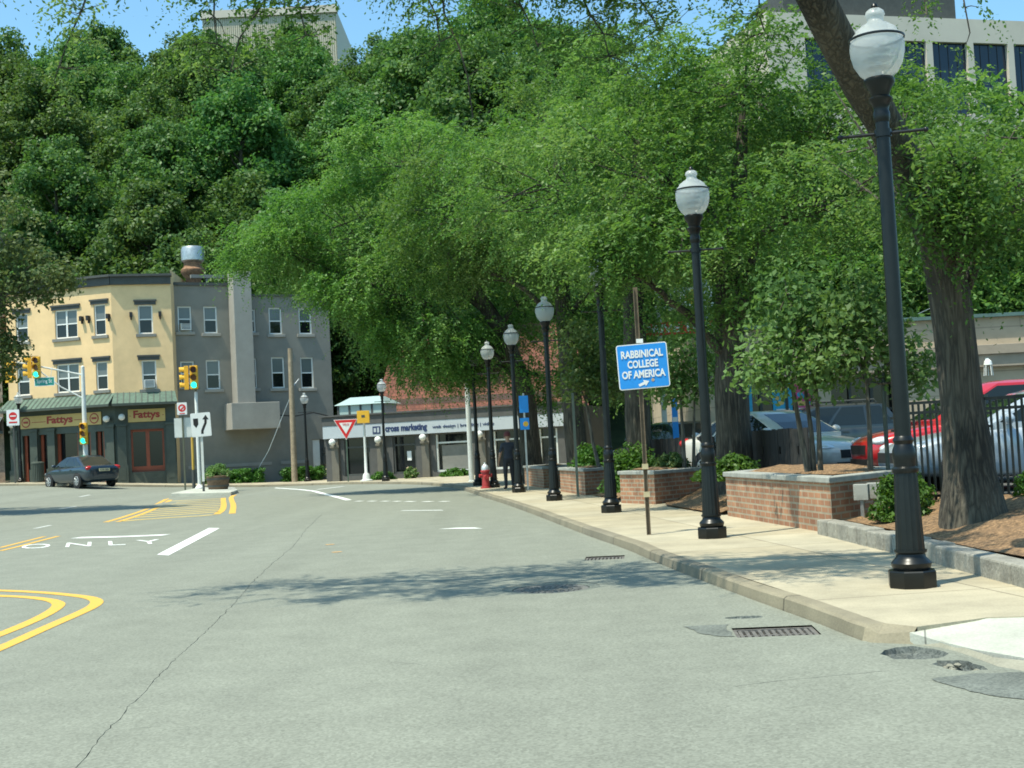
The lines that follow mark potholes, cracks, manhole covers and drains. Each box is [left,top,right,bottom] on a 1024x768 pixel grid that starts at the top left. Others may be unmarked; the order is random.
pothole [933,660,988,671]
crack [76,517,319,768]
drain grate [733,627,819,638]
manhole cover [502,582,600,594]
